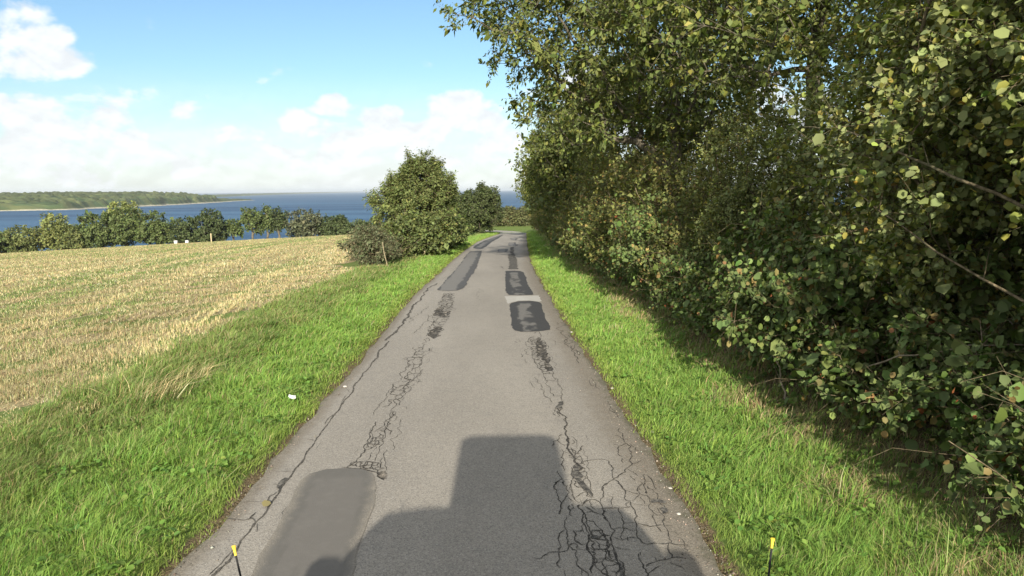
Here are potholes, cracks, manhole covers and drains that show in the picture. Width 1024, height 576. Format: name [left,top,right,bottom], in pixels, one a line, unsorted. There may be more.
crack [210,283,455,576]
crack [521,322,685,576]
